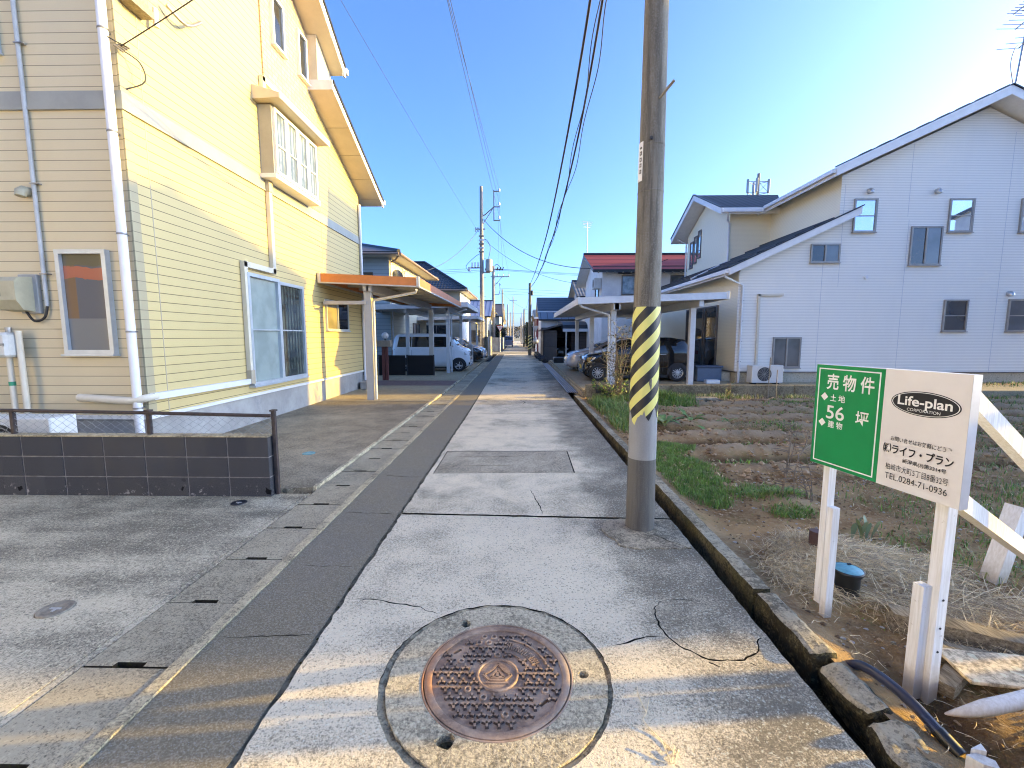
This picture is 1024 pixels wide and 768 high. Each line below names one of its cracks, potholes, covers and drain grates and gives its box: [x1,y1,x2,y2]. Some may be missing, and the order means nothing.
manhole cover [377,606,613,768]
crack [619,599,761,667]
manhole cover [34,600,76,619]
